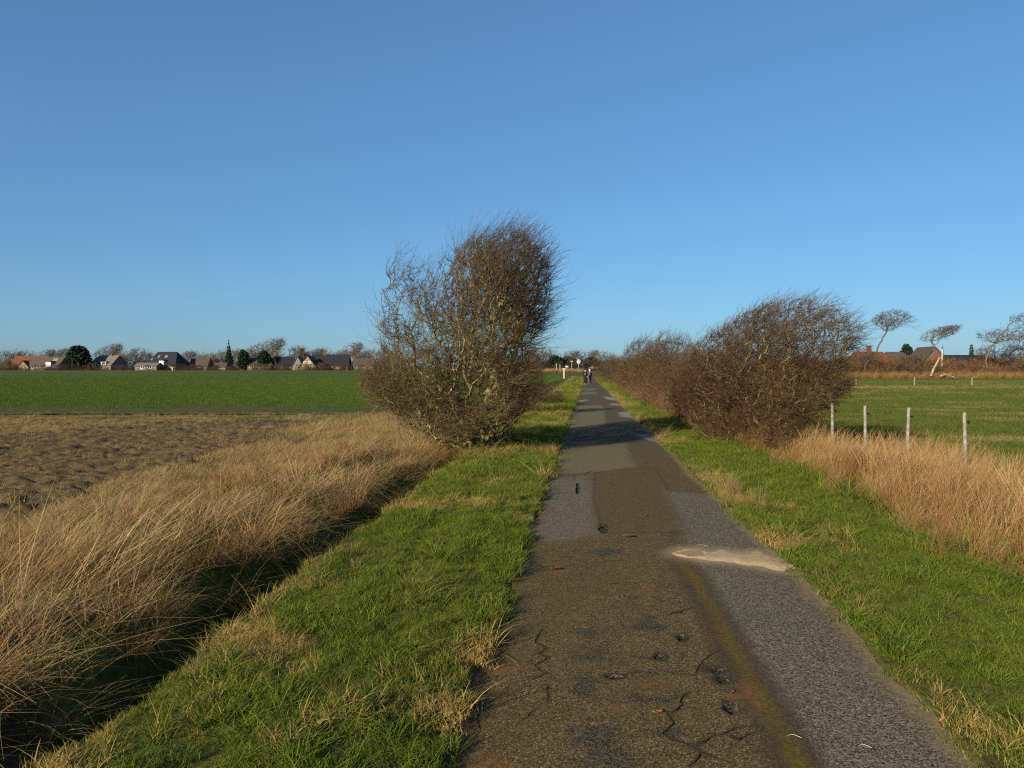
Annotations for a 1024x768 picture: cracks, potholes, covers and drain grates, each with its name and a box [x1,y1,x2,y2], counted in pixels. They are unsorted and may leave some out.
crack [663,692,752,765]
crack [526,628,549,718]
pothole [722,703,740,715]
